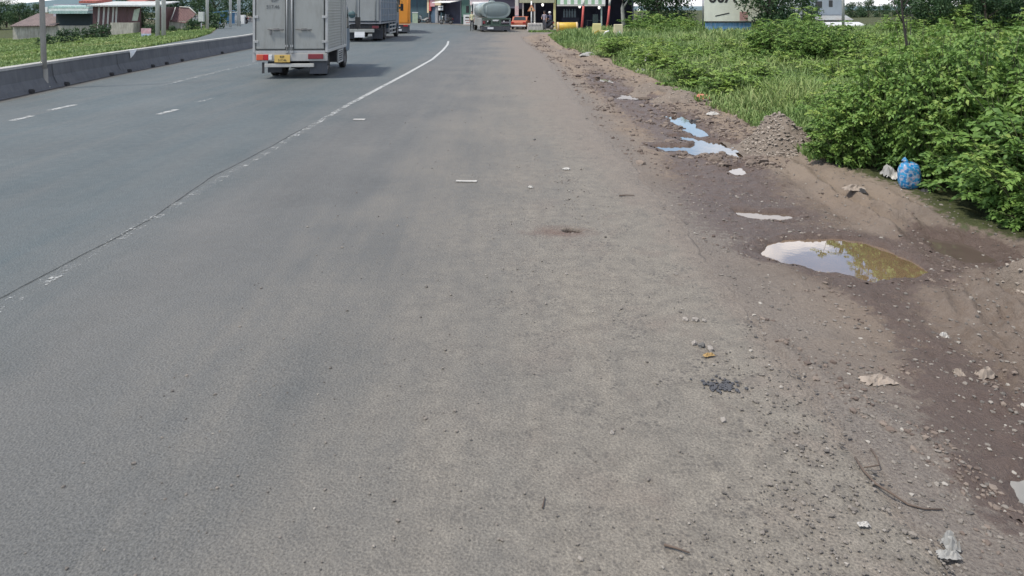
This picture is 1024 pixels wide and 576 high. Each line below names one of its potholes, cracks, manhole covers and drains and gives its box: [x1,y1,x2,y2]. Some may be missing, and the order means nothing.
pothole [746,231,947,286]
pothole [655,112,713,140]
pothole [644,132,748,158]
